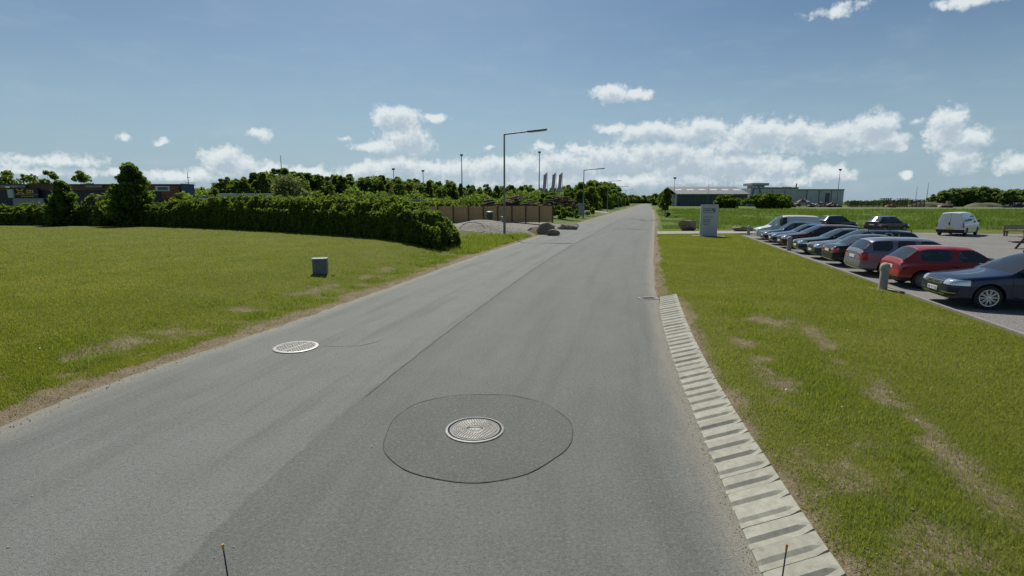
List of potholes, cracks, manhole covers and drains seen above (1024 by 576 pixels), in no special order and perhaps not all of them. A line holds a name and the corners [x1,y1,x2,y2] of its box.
manhole cover [445,417,504,443]
